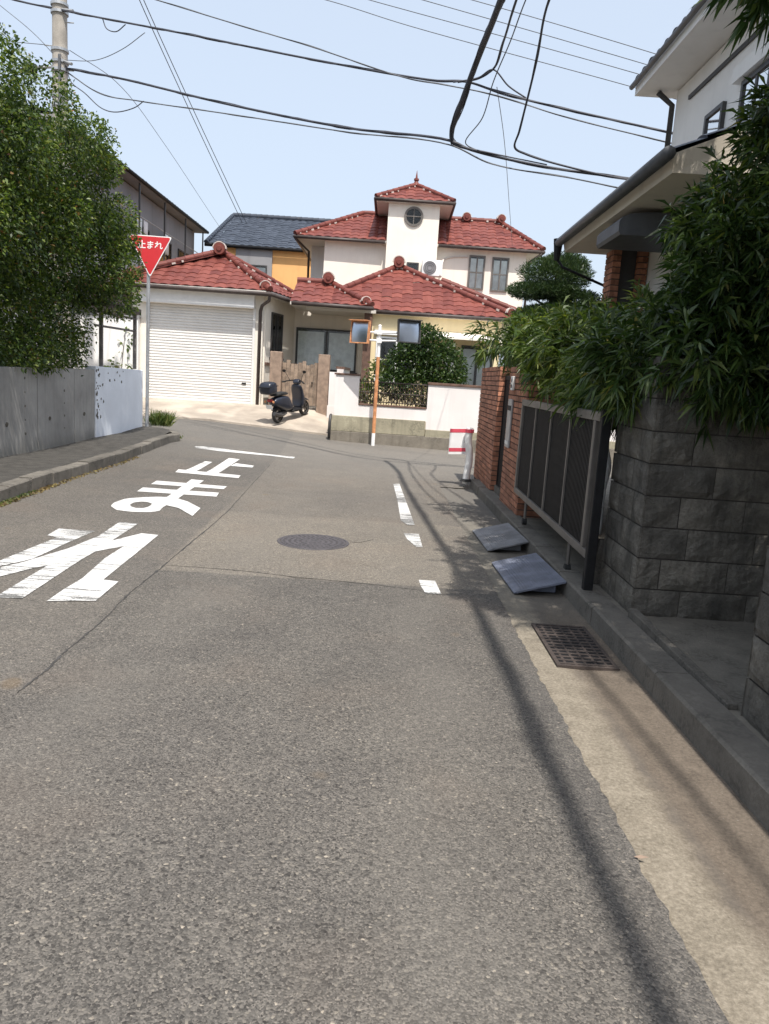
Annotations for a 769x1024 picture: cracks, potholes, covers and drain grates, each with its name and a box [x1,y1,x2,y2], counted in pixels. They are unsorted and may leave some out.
drain grate [531,623,620,671]
manhole cover [277,534,349,550]
